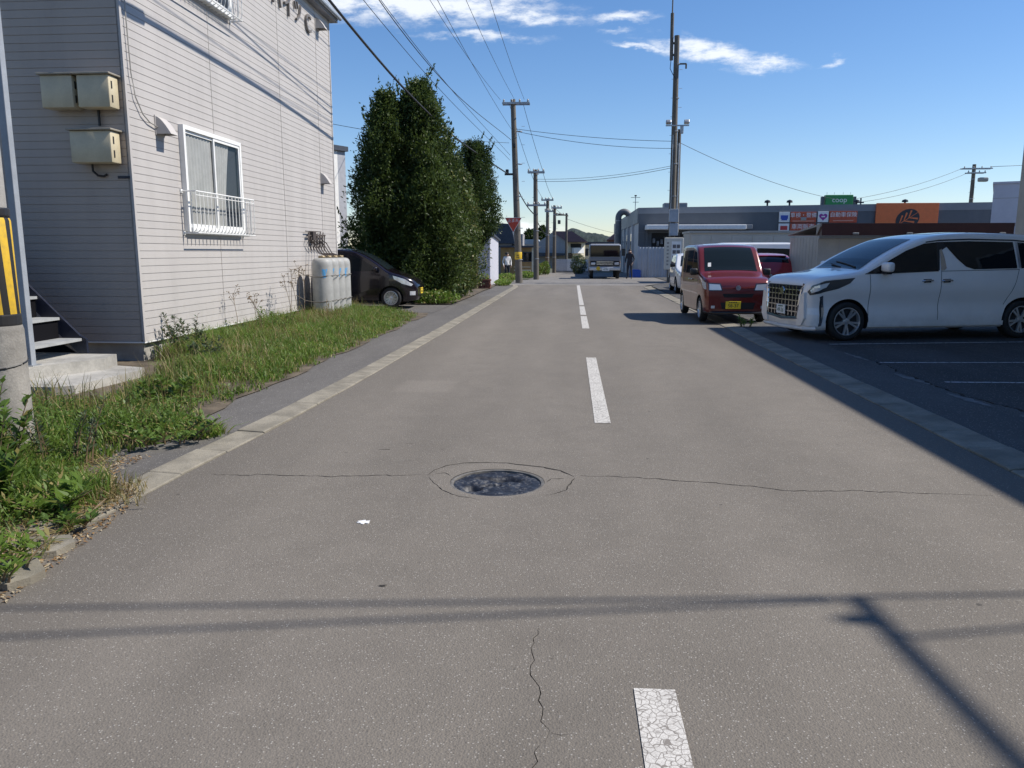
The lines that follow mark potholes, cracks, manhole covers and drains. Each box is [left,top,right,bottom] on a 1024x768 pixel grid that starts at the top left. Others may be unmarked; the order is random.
crack [215,462,574,498]
manhole cover [450,469,544,499]
crack [530,627,559,768]
crack [580,475,991,496]
